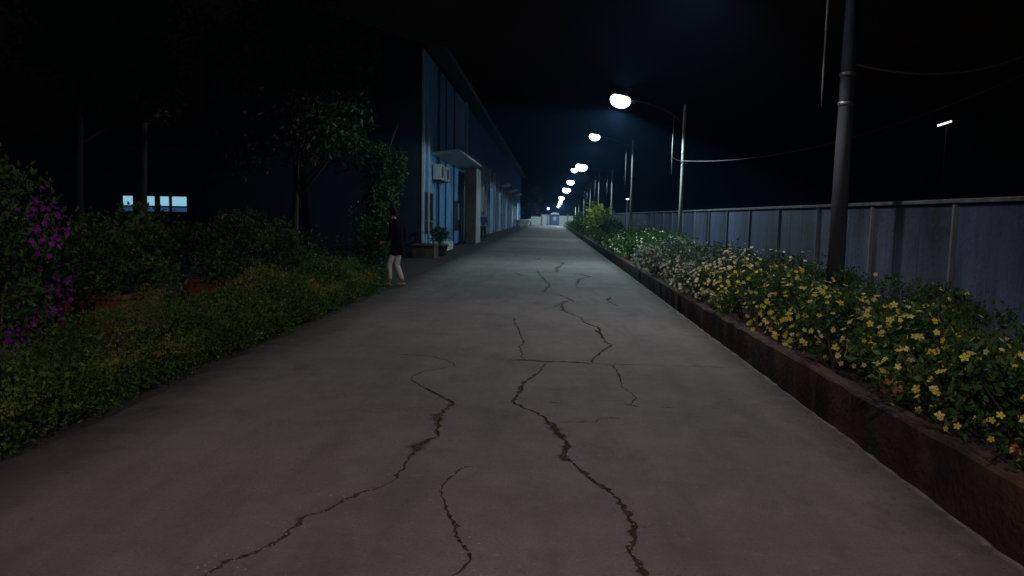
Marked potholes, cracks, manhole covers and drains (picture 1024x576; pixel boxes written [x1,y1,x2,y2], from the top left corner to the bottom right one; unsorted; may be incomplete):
crack [511,250,740,576]
crack [204,354,472,576]
